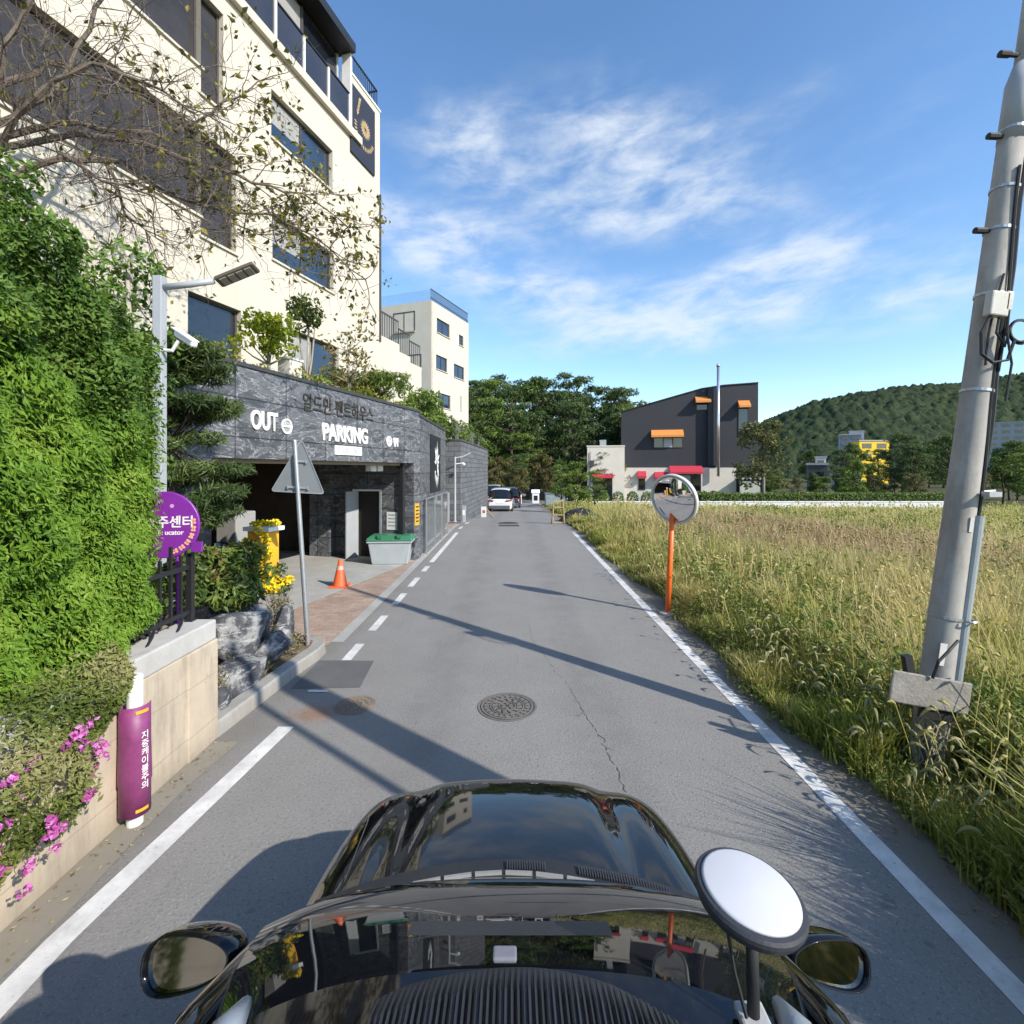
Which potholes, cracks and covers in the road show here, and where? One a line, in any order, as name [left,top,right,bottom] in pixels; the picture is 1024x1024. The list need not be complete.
crack [530,629,627,793]
manhole cover [478,693,537,721]
manhole cover [334,695,376,715]
